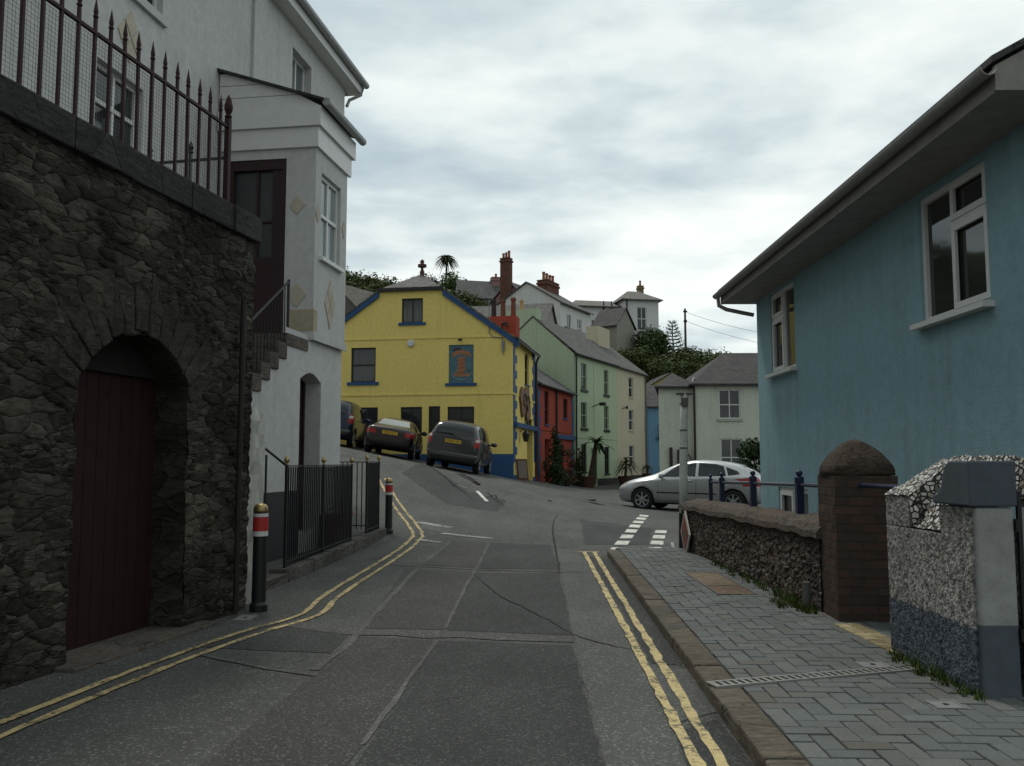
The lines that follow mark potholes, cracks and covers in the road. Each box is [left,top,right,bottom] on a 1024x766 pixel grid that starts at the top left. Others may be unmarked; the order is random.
drain grate [706,665,919,689]
crack [552,515,560,573]
crack [473,574,631,649]
manhole cover [925,700,968,709]
